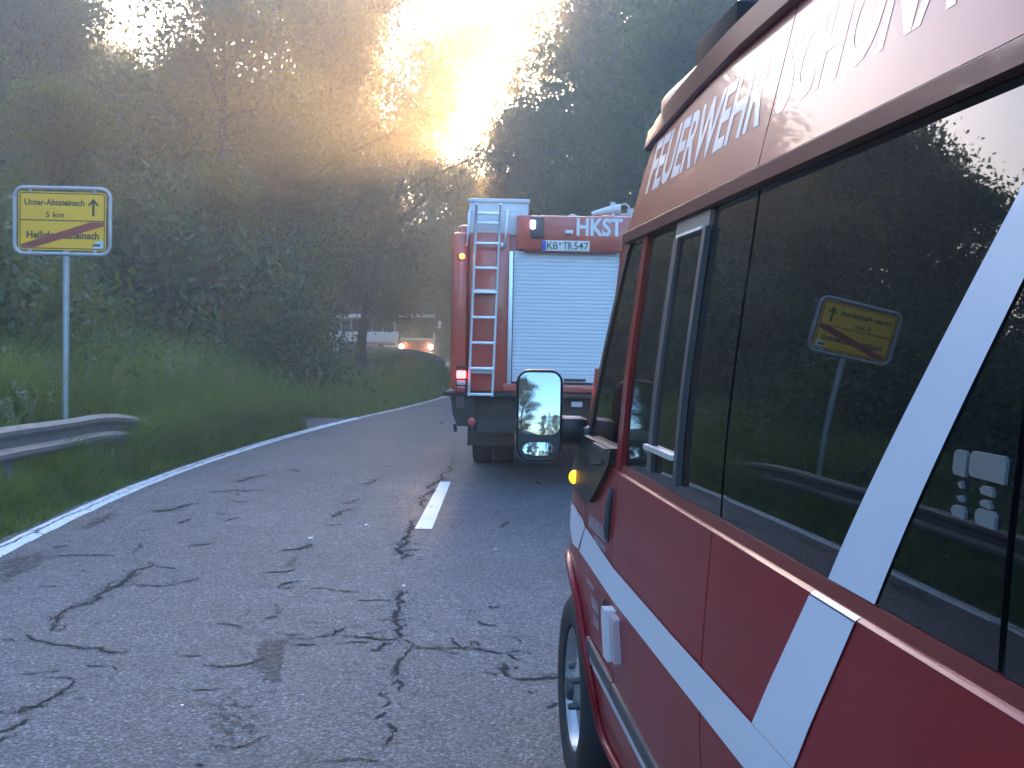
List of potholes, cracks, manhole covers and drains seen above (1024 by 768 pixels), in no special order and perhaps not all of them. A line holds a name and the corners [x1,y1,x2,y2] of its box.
crack [184,606,558,763]
crack [0,429,311,741]
